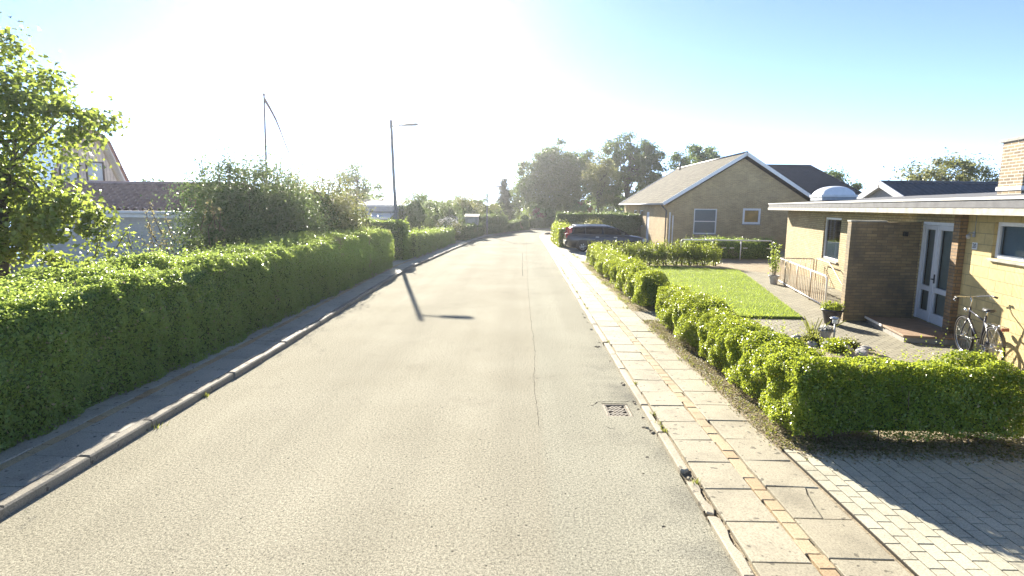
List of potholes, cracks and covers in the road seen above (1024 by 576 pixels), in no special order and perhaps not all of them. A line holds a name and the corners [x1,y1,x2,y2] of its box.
crack [521,245,540,428]
